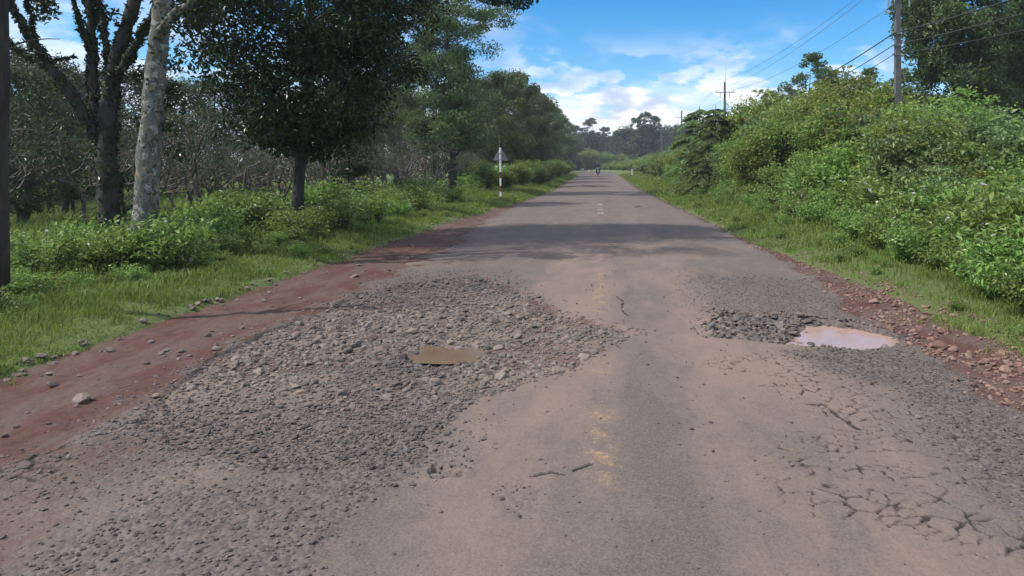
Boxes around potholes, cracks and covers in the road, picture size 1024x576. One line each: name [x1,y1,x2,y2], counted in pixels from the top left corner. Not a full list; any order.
crack [616,296,630,316]
pothole [427,463,467,479]
crack [693,346,1024,559]
pothole [711,311,900,350]
pothole [127,275,641,473]
crack [529,463,595,477]
